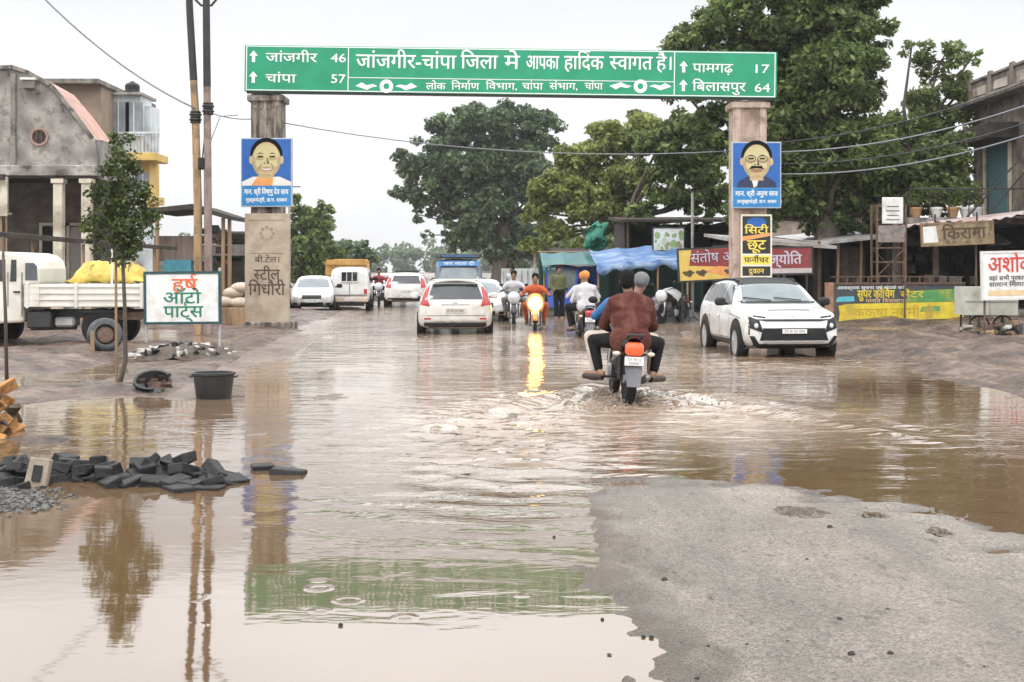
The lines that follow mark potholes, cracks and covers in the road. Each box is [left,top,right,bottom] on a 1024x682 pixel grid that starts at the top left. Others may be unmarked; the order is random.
pothole [775,506,832,519]
pothole [926,527,955,537]
pothole [863,511,891,519]
